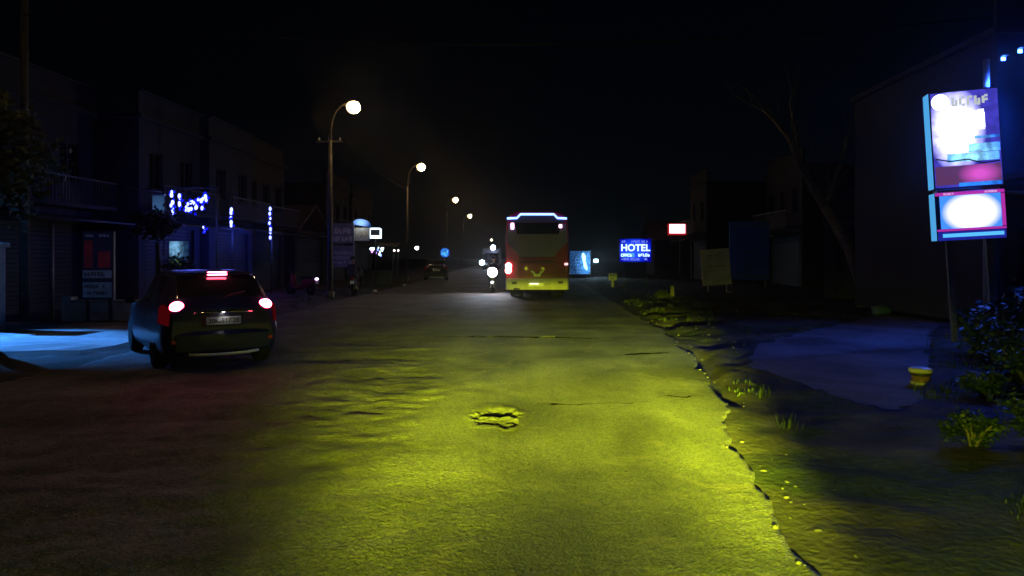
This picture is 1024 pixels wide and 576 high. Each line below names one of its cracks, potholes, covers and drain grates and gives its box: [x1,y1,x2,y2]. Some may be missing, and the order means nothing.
crack [536,393,708,409]
crack [417,335,682,357]
pothole [462,403,533,432]
